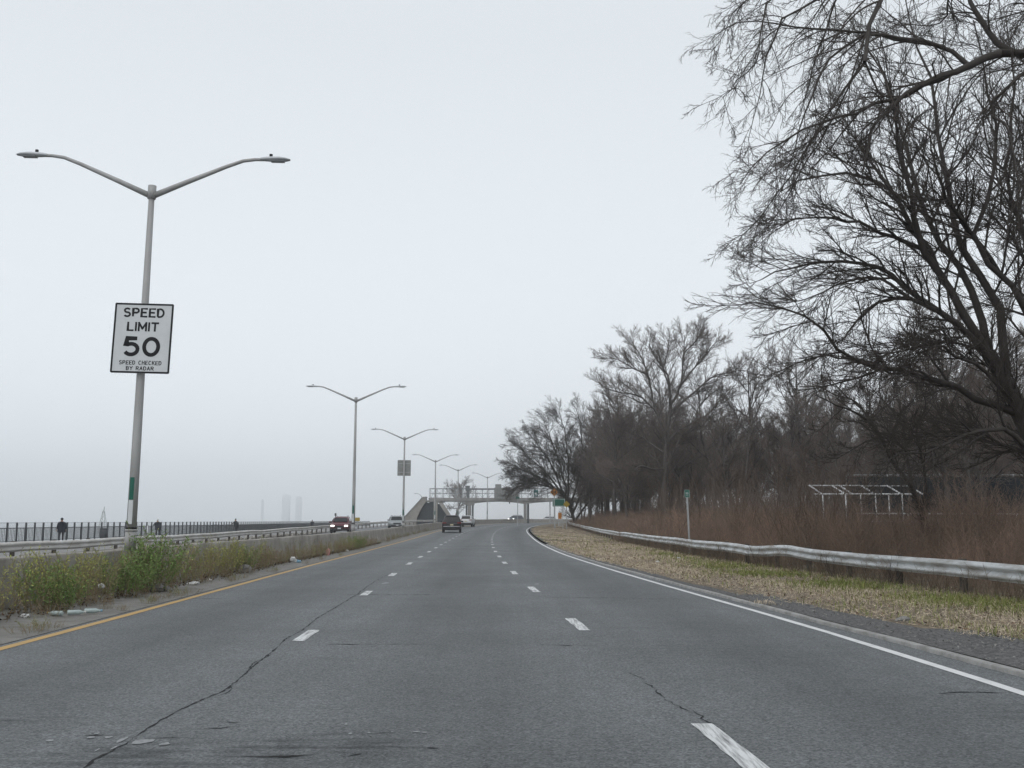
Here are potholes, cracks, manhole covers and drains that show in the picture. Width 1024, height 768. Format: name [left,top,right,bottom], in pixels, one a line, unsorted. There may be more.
crack [81,575,387,768]
crack [630,673,715,724]
